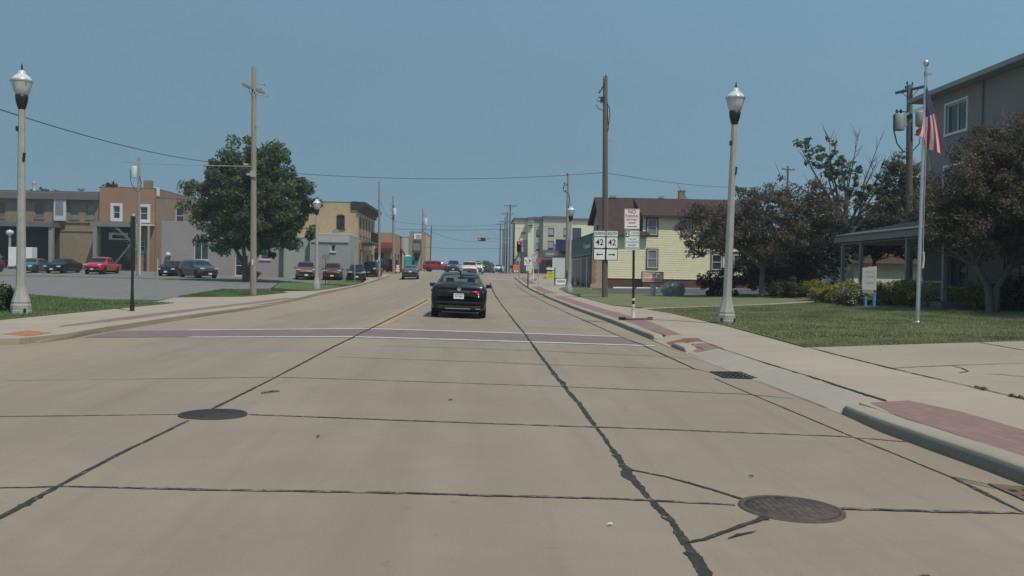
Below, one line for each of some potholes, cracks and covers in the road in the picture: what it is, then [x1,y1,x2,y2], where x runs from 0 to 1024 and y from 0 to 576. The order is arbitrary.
manhole cover [178,409,247,420]
drain grate [710,371,758,379]
manhole cover [738,495,846,524]
